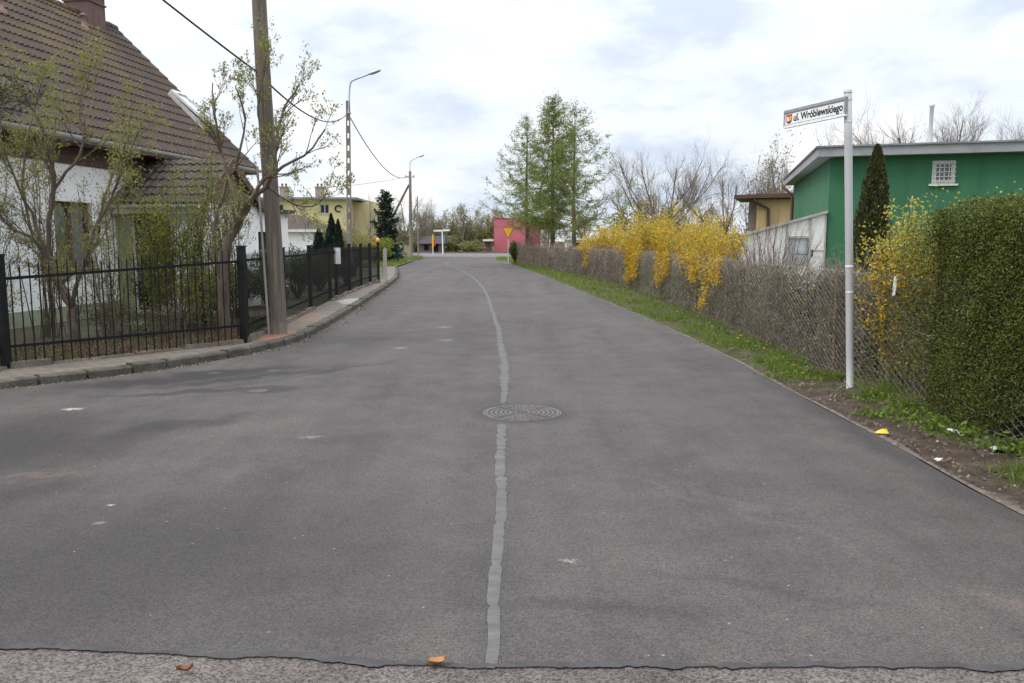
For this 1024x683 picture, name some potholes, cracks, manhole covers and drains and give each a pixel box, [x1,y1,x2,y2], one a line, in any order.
manhole cover [483,405,562,422]
